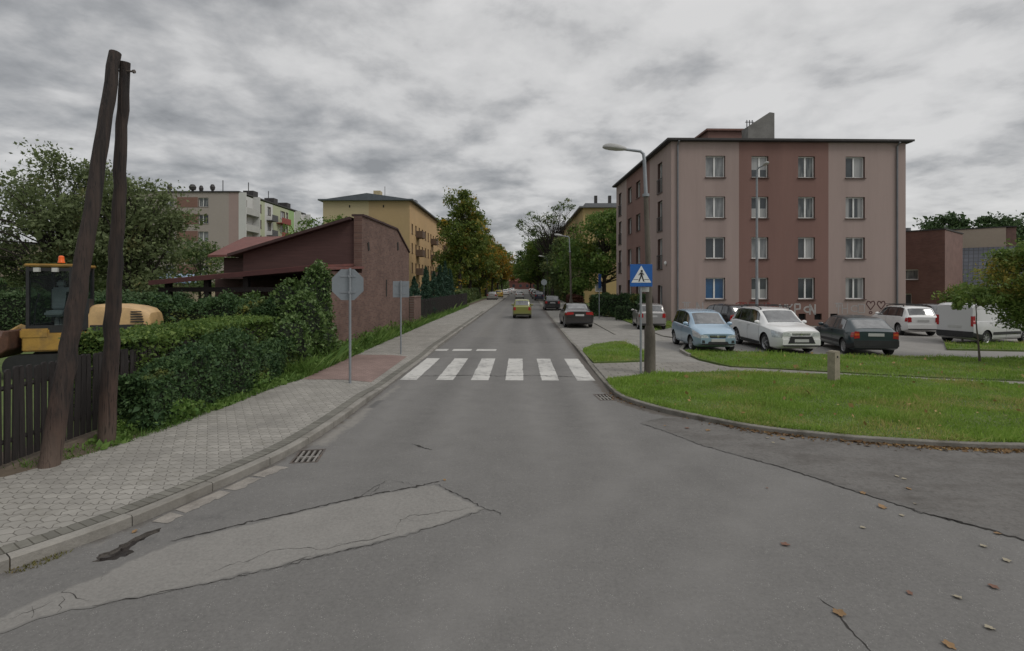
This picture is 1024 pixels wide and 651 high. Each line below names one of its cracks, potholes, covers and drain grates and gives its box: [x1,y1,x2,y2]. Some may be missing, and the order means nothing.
drain grate [289,449,326,464]
crack [16,480,501,617]
crack [822,600,871,651]
pothole [93,528,161,562]
